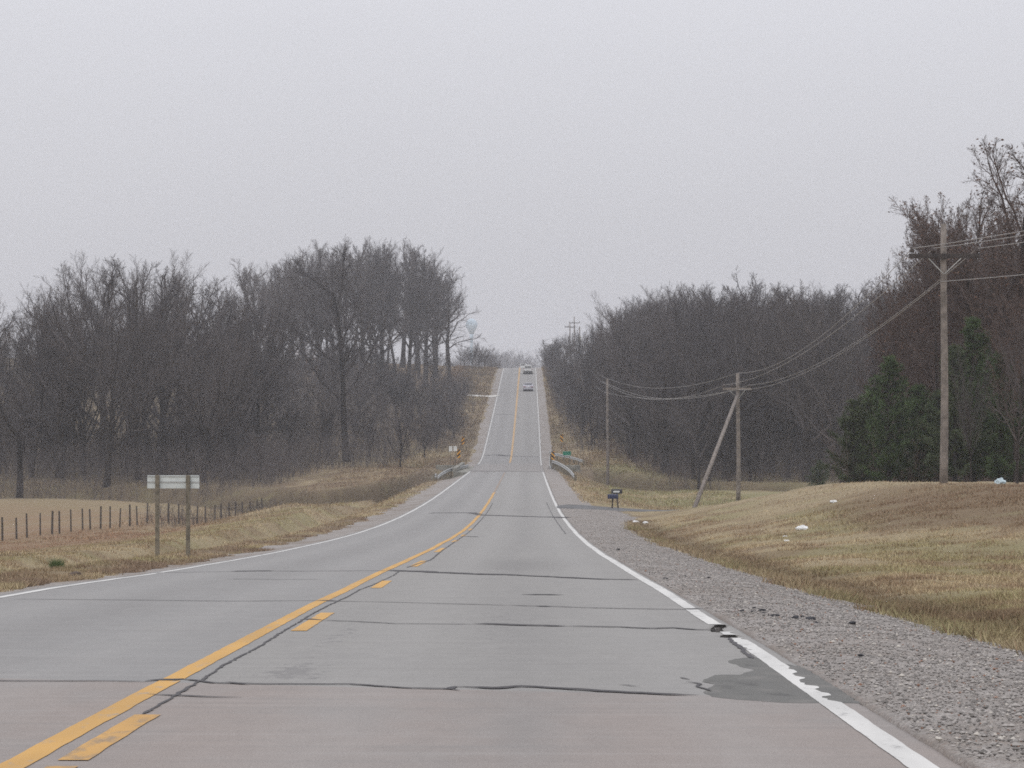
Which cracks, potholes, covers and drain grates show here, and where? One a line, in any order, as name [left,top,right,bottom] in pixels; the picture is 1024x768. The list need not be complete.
crack [97,503,710,714]
